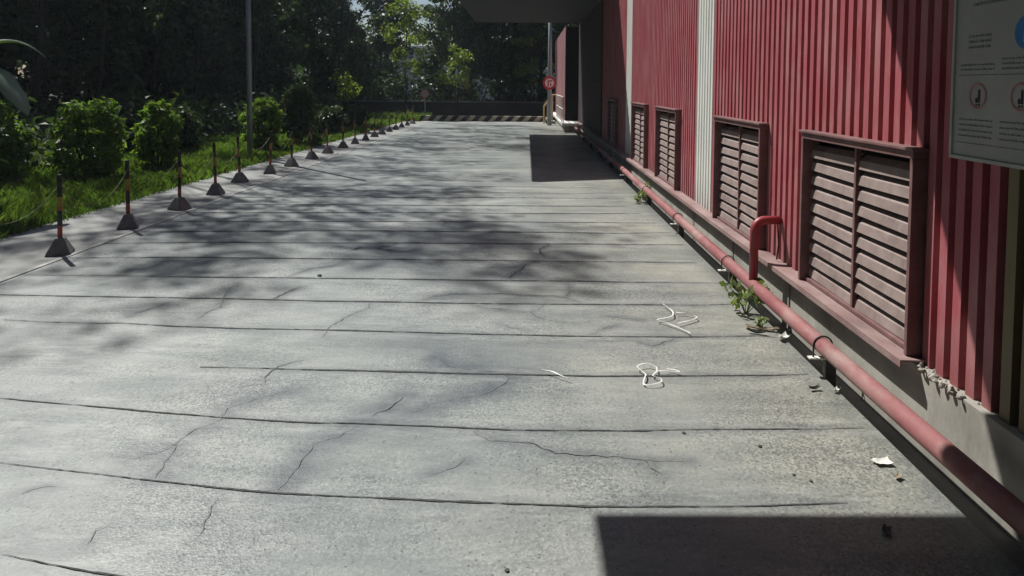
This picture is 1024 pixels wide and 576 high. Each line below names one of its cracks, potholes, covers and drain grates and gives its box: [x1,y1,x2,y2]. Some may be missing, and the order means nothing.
crack [473,428,690,471]
crack [141,359,302,476]
crack [372,357,509,415]
crack [429,244,574,330]
